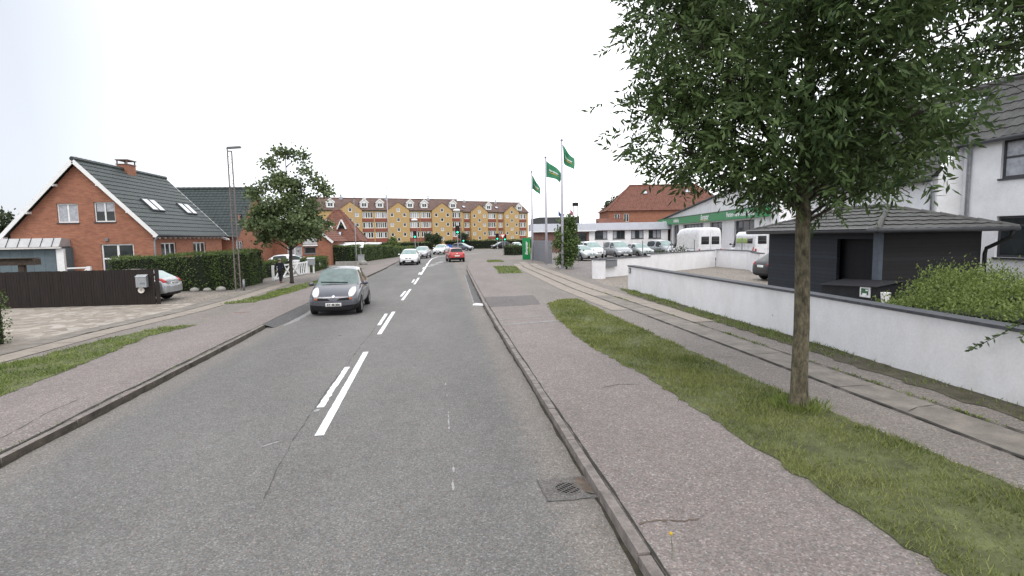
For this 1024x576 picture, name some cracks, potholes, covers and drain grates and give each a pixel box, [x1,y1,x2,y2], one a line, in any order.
crack [262,327,376,504]
drain grate [539,476,597,502]
